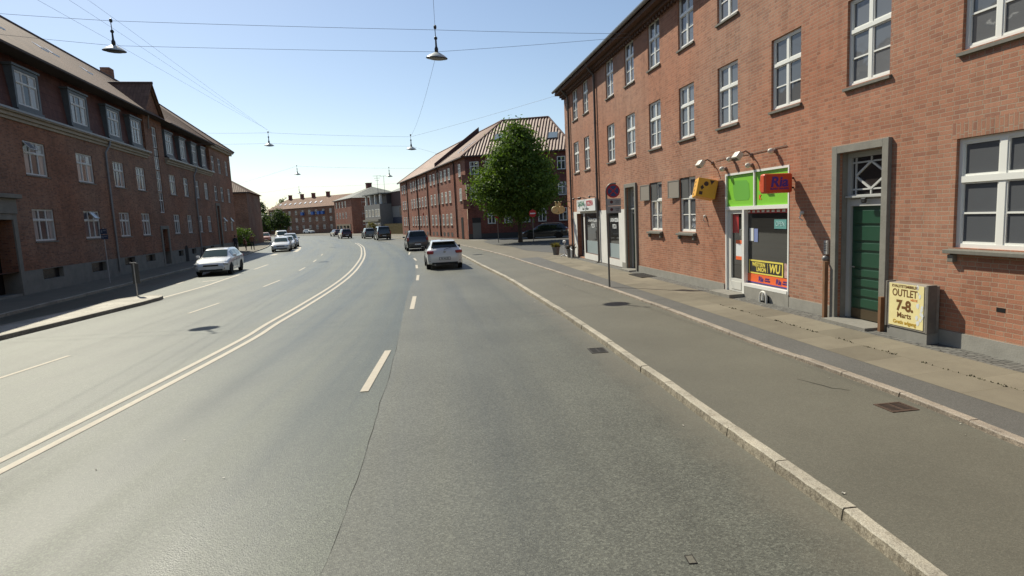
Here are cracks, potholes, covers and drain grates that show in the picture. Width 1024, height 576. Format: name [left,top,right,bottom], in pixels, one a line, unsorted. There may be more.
drain grate [873,402,920,413]
